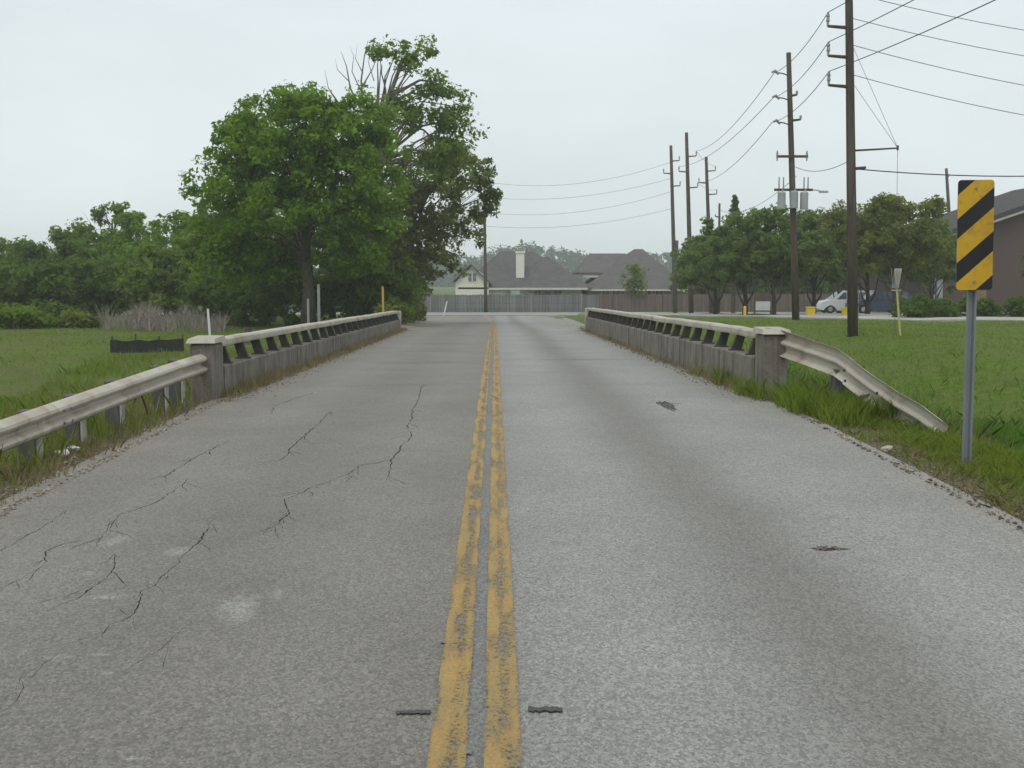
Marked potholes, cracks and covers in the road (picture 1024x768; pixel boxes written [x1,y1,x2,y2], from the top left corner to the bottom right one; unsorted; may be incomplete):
crack [1,441,229,645]
crack [2,652,60,707]
crack [251,385,428,538]
pothole [656,401,677,412]
